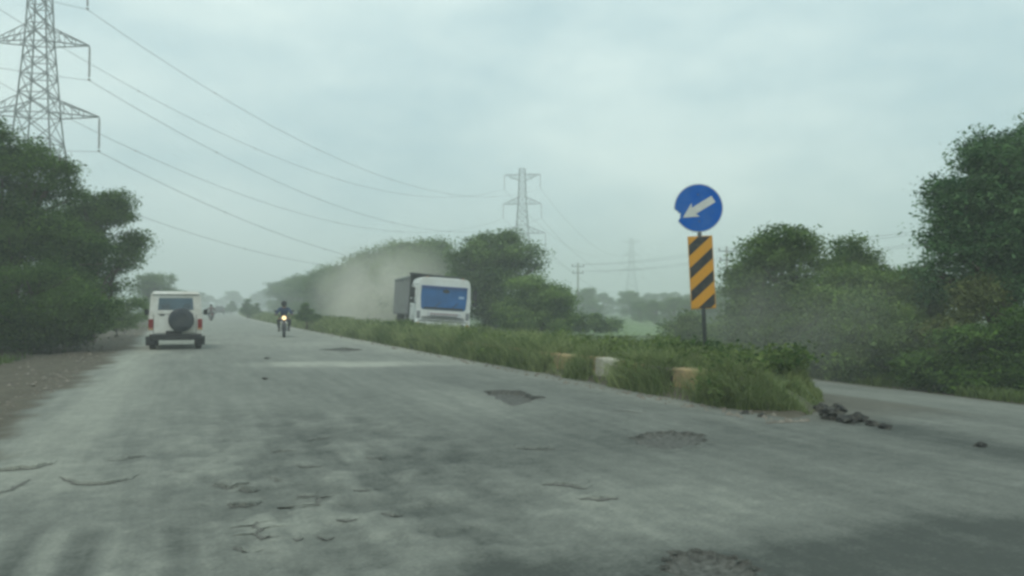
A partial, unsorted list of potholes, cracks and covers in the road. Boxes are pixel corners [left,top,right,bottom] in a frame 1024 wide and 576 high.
crack [541,478,618,501]
pothole [480,390,552,407]
pothole [617,429,718,452]
crack [209,436,403,552]
crack [0,454,146,493]
pothole [640,545,782,576]
